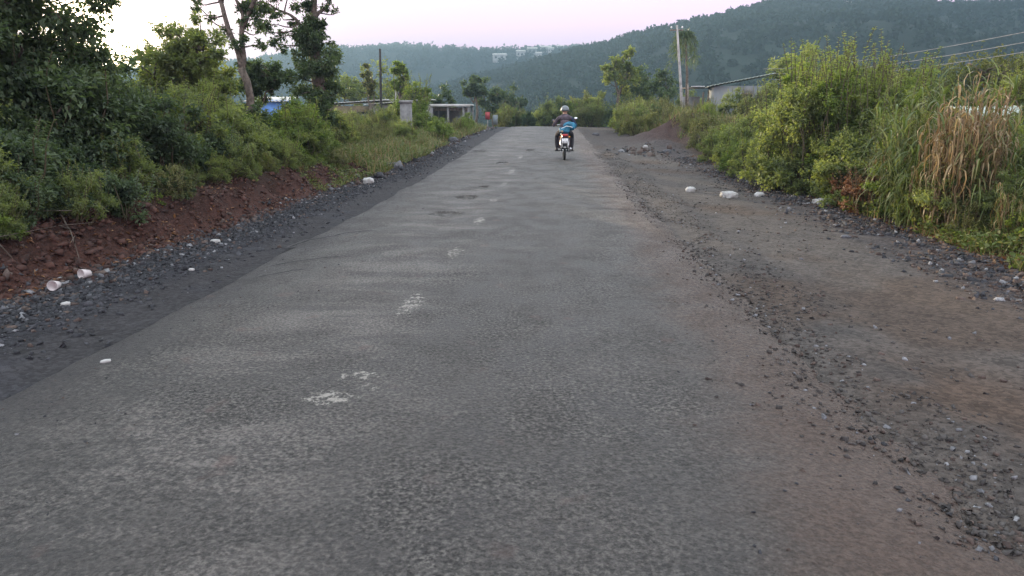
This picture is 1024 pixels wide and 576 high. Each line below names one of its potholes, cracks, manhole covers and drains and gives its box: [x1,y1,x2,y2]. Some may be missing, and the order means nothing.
pothole [418,210,473,218]
